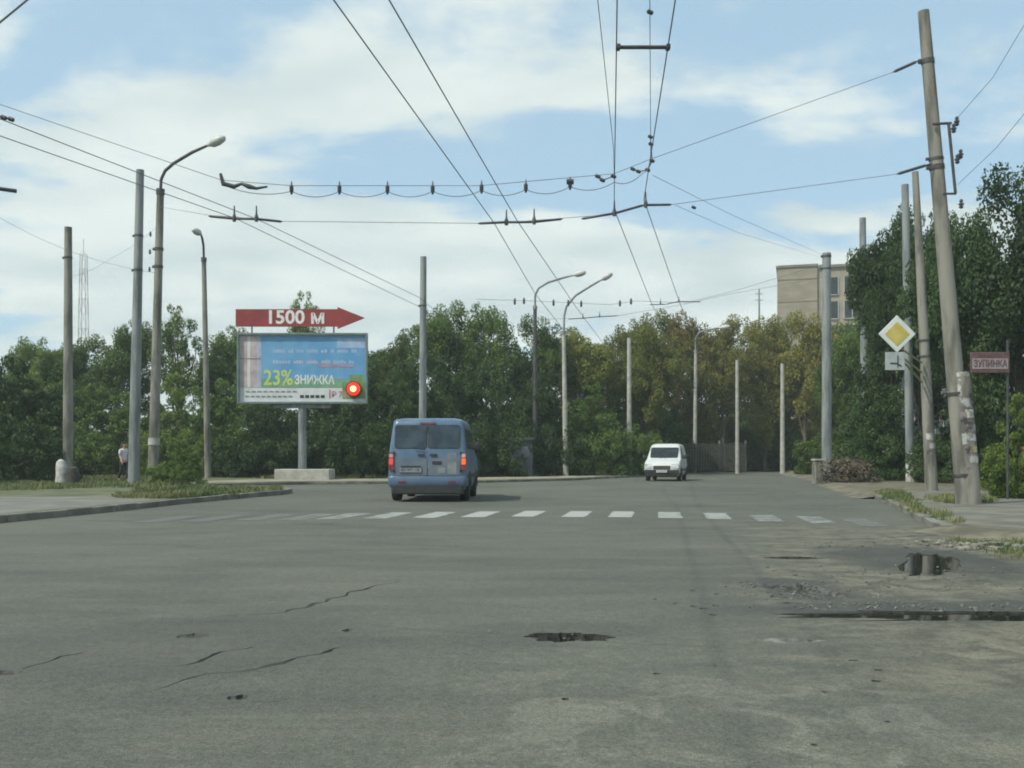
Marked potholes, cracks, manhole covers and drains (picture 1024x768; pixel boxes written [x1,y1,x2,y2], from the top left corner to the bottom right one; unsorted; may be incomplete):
pothole [777,610,1024,622]
pothole [753,582,848,599]
pothole [524,633,616,642]
crack [23,652,84,669]
pothole [898,552,961,576]
crack [156,645,349,690]
crack [218,581,399,617]
